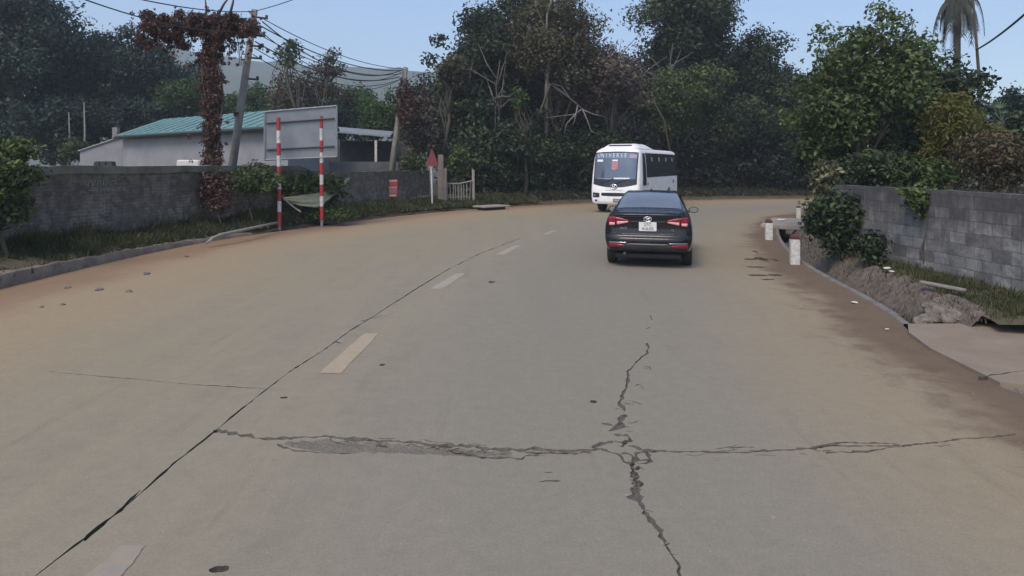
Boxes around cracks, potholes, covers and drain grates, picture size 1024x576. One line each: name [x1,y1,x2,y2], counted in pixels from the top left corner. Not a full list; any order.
crack [213,315,1015,576]
